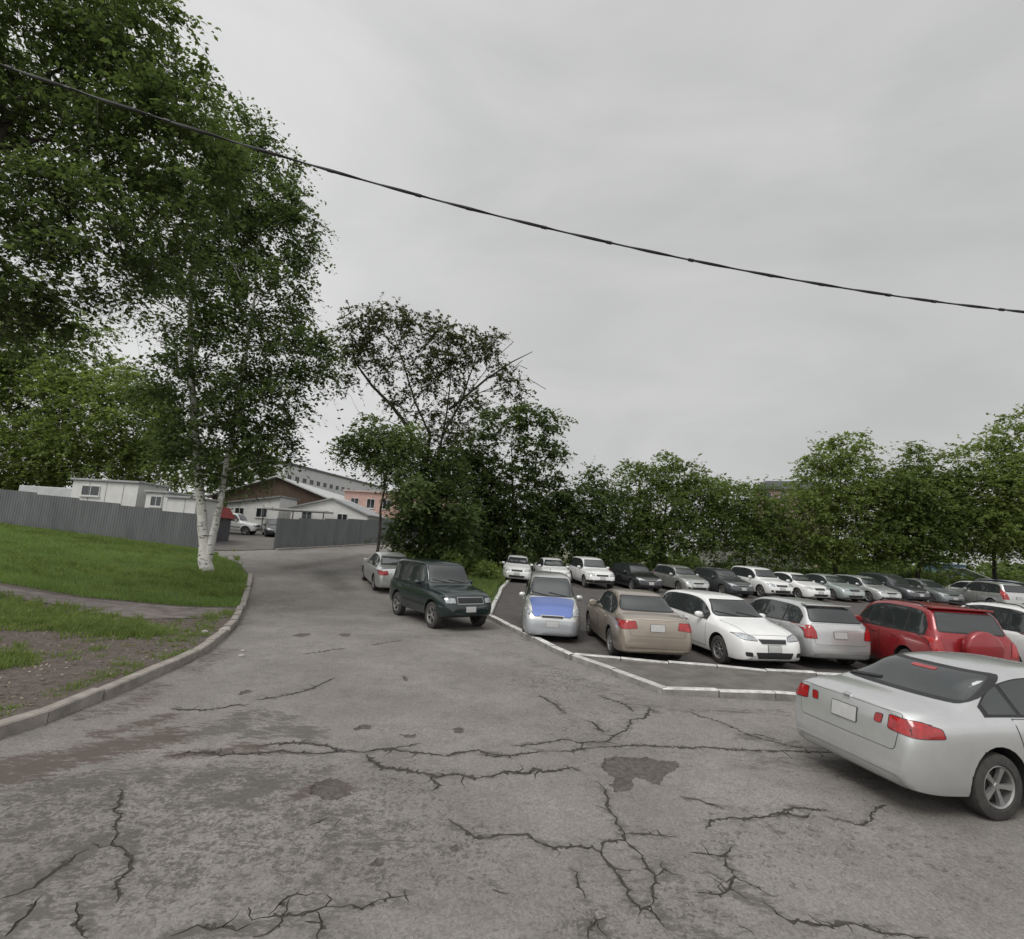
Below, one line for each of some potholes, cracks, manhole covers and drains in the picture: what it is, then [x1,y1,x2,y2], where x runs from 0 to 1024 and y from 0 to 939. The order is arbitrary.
crack [0,788,135,938]
crack [170,678,334,712]
crack [170,696,929,939]
pothole [309,777,353,801]
